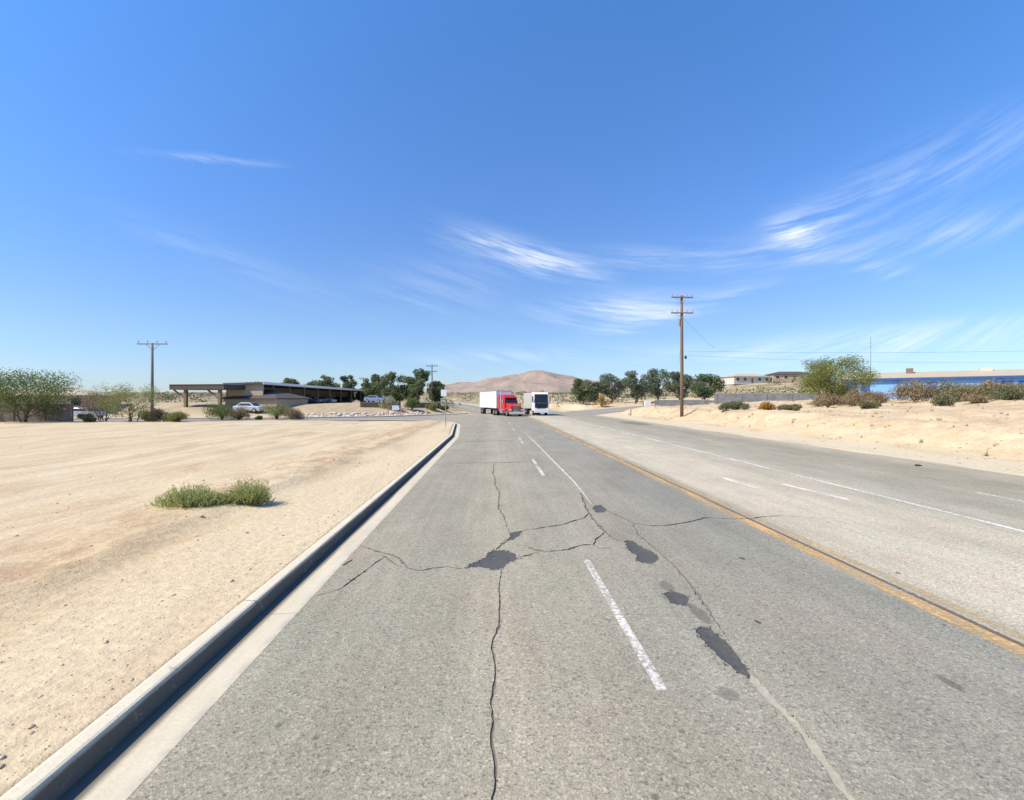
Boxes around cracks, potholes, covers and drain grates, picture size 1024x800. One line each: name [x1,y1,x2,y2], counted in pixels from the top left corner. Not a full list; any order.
crack [320,546,462,595]
crack [490,434,810,800]
